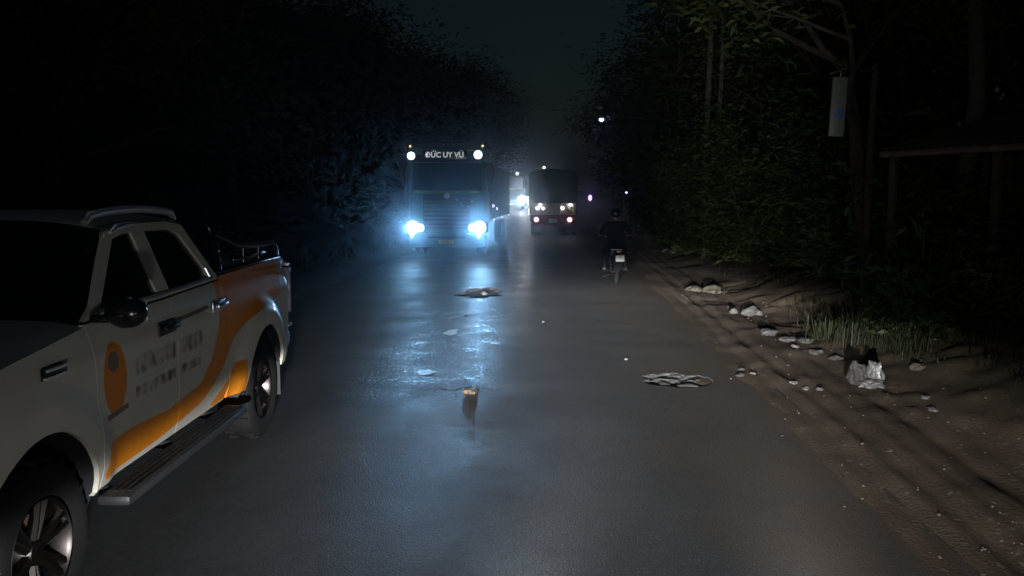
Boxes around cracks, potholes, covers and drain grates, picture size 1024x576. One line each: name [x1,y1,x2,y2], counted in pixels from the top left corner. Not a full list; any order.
pothole [453,287,504,299]
pothole [642,372,714,388]
